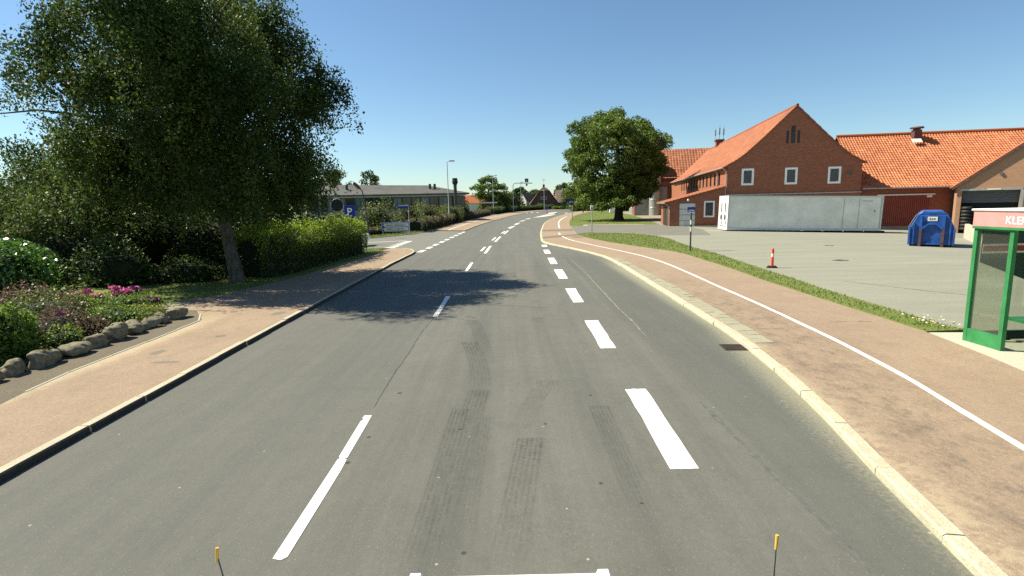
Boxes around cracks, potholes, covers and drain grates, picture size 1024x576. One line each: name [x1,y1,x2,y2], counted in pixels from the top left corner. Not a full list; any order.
crack [375,320,432,405]
